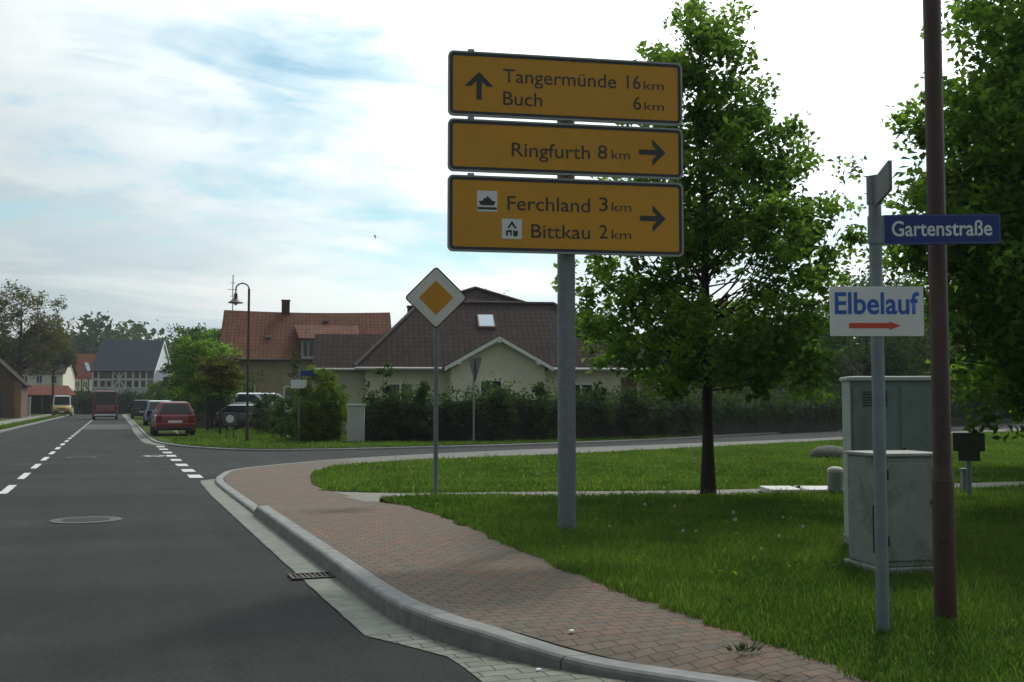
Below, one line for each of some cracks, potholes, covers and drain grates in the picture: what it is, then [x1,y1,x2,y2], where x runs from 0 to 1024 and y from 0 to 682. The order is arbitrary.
manhole cover [49,516,122,524]
drain grate [287,571,336,580]
